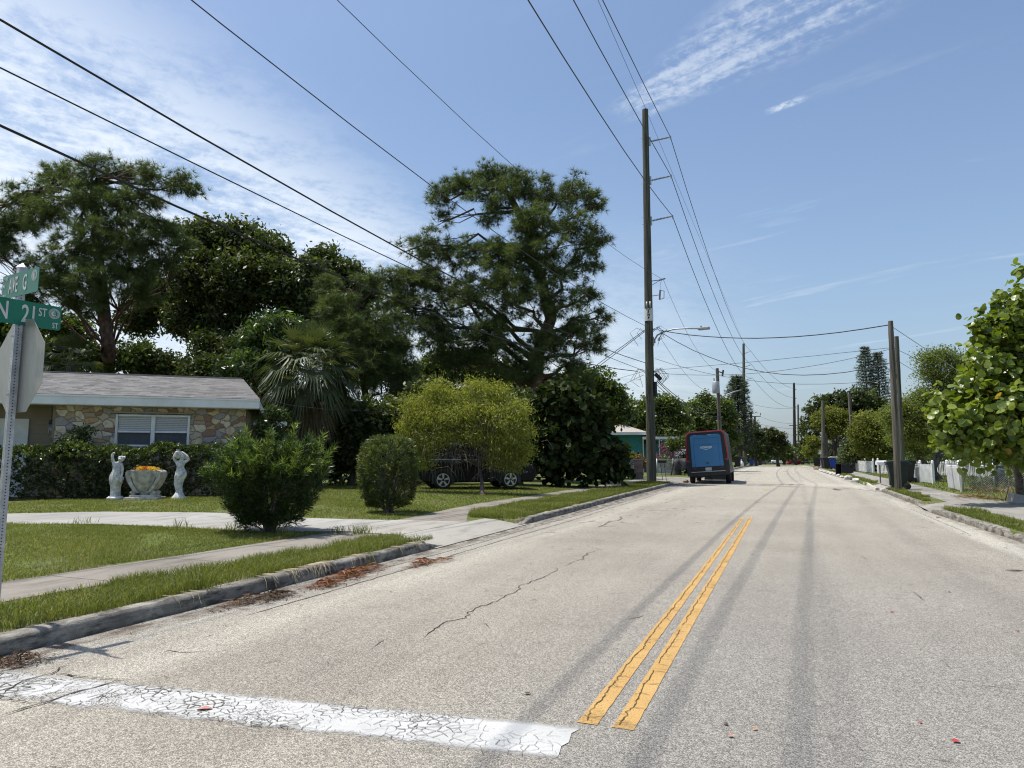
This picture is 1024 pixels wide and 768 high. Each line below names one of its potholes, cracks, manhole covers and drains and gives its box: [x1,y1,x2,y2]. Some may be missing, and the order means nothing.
crack [426,550,598,636]
